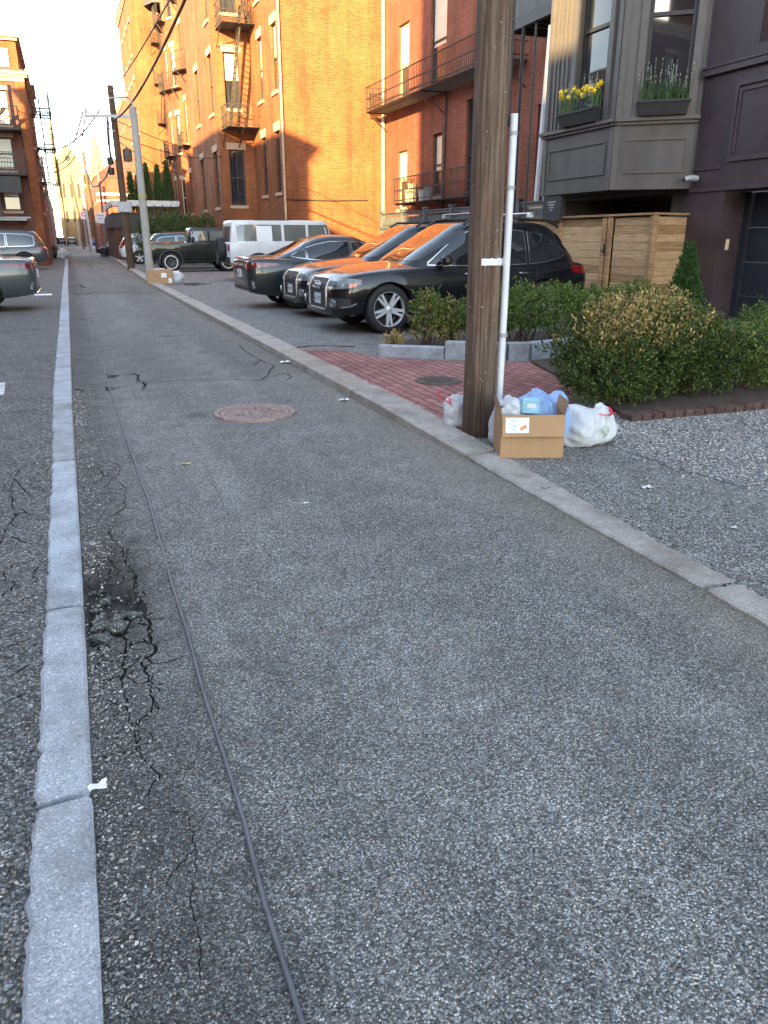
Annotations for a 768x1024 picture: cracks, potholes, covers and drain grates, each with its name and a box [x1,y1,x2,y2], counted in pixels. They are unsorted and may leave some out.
manhole cover [213,403,296,423]
crack [82,459,202,979]
manhole cover [415,376,461,385]
crack [81,345,292,405]
crack [0,458,47,703]
pothole [83,579,148,650]
